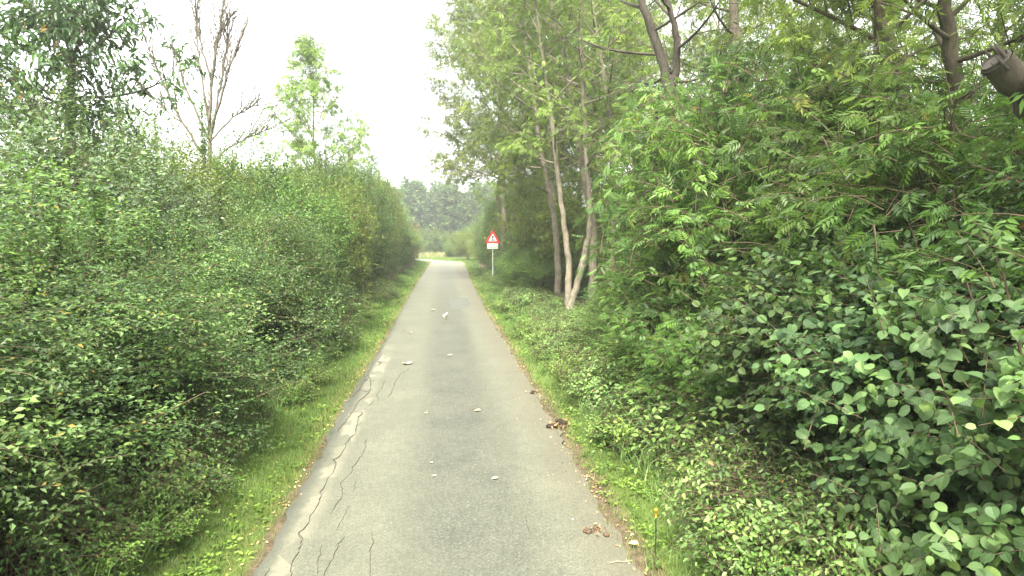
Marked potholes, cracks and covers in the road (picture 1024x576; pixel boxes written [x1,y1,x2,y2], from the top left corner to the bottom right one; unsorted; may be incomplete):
crack [290,355,410,576]
